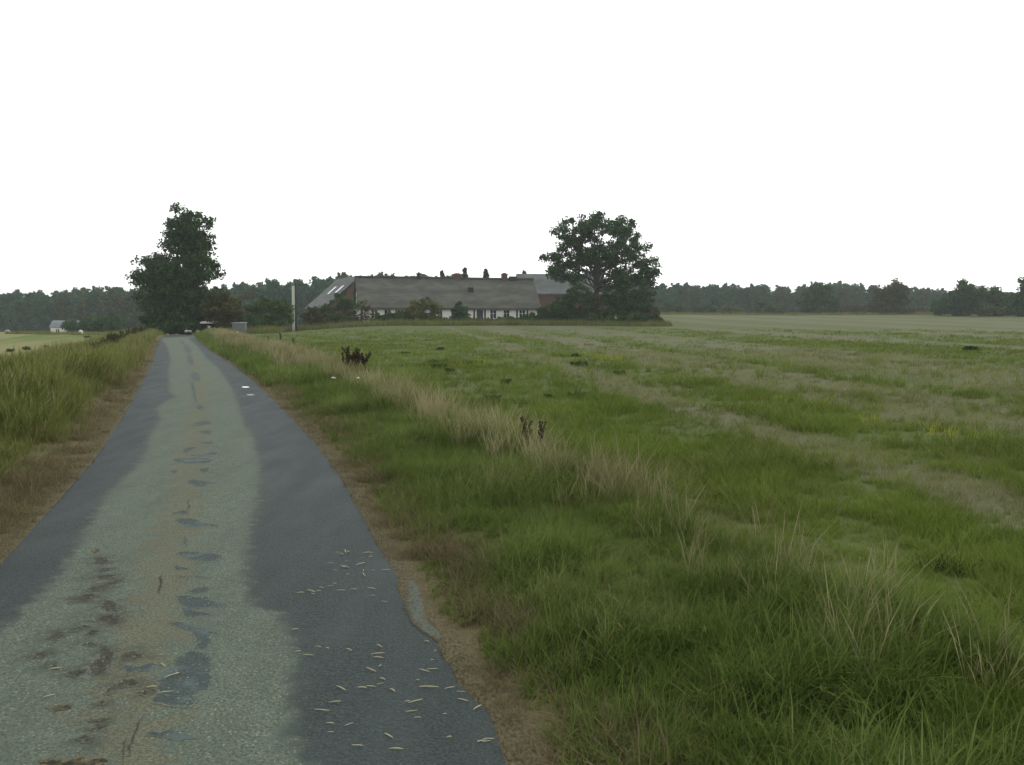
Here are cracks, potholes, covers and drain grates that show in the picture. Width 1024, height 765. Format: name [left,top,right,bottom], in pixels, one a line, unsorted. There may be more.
pothole [69,593,101,603]
pothole [87,644,117,676]
pothole [103,677,142,696]
pothole [47,630,66,640]
crack [122,714,145,758]
pothole [64,668,88,677]
pothole [91,613,124,626]
pothole [85,579,122,592]
pothole [35,753,111,765]
pothole [76,733,94,743]
pothole [46,702,75,712]
pothole [99,599,121,613]
